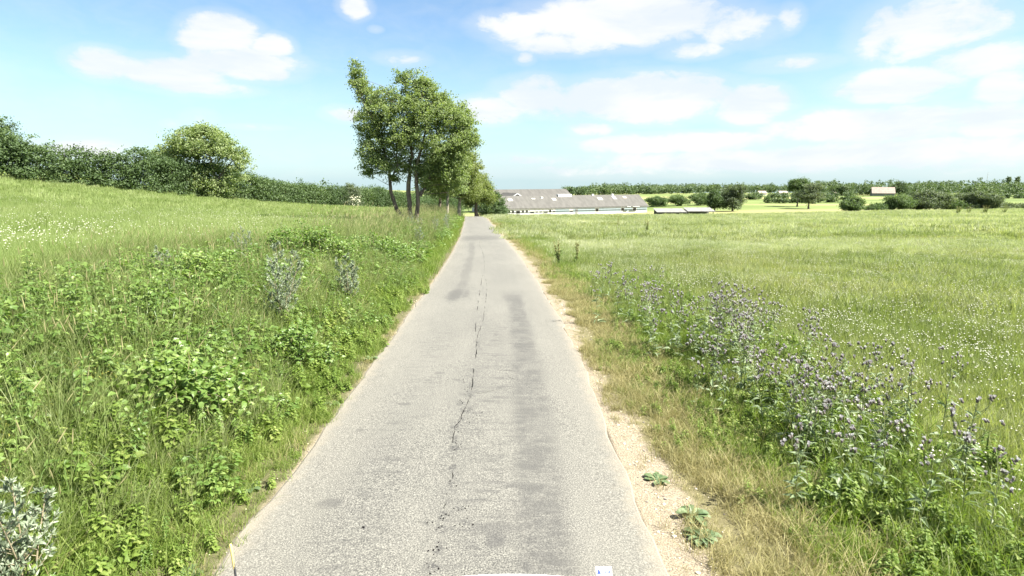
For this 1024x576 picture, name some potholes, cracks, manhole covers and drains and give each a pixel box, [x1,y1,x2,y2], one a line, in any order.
crack [426,255,487,575]
